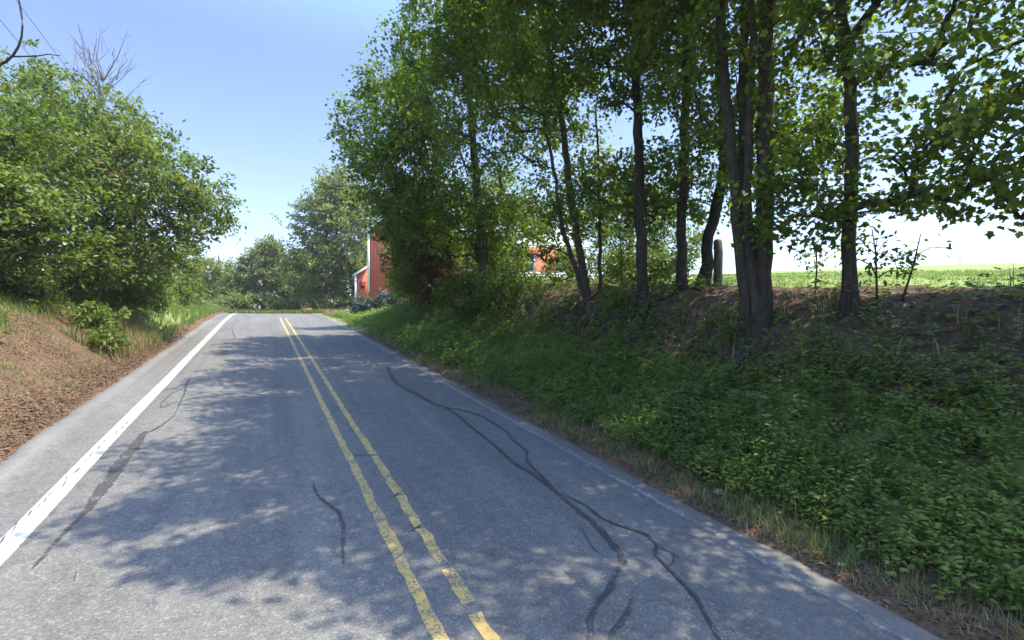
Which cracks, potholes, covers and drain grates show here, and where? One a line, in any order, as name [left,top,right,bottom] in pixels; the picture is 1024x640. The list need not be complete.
crack [0,379,190,580]
